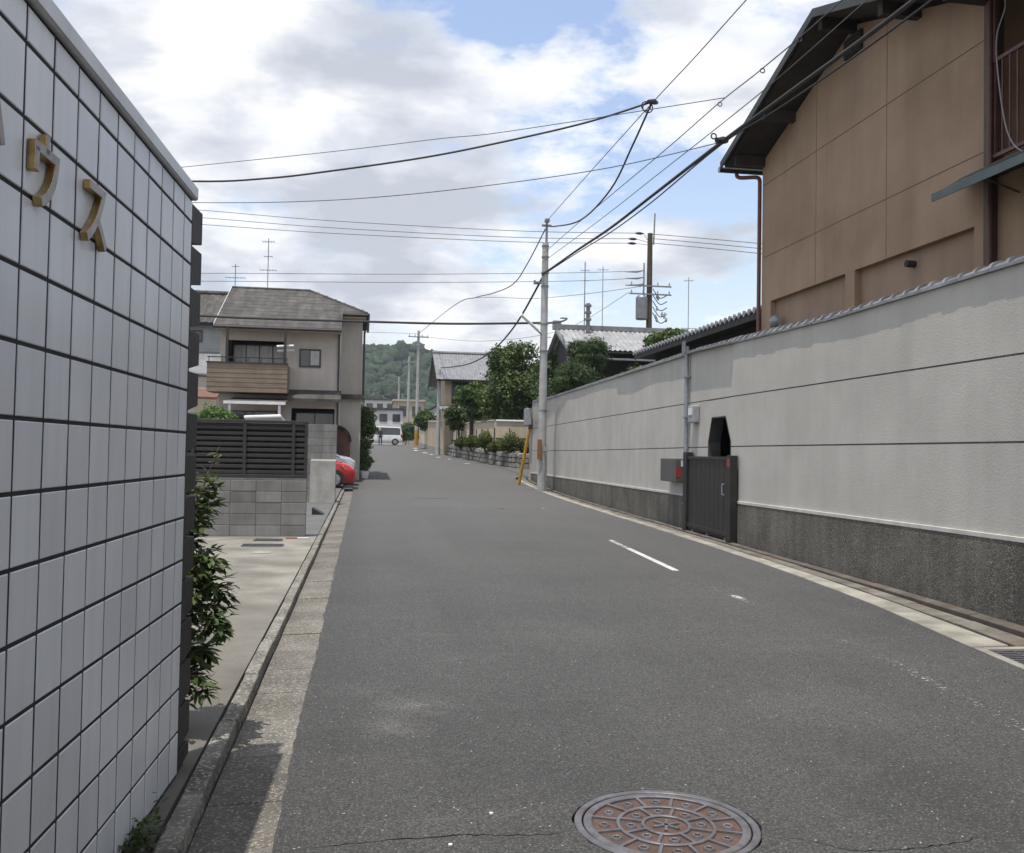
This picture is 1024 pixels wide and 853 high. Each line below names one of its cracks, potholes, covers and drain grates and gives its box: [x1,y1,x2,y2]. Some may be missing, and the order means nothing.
drain grate [973,646,1024,670]
crack [327,834,539,847]
manhole cover [574,790,761,853]
